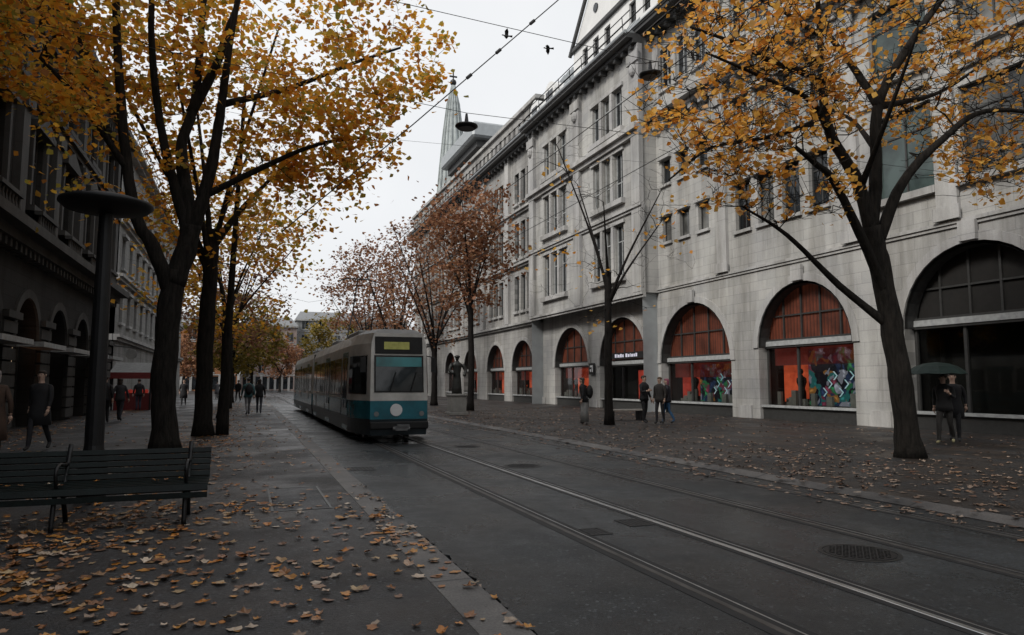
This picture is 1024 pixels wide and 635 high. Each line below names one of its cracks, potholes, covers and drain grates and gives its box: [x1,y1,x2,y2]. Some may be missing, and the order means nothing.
manhole cover [818,544,903,562]
